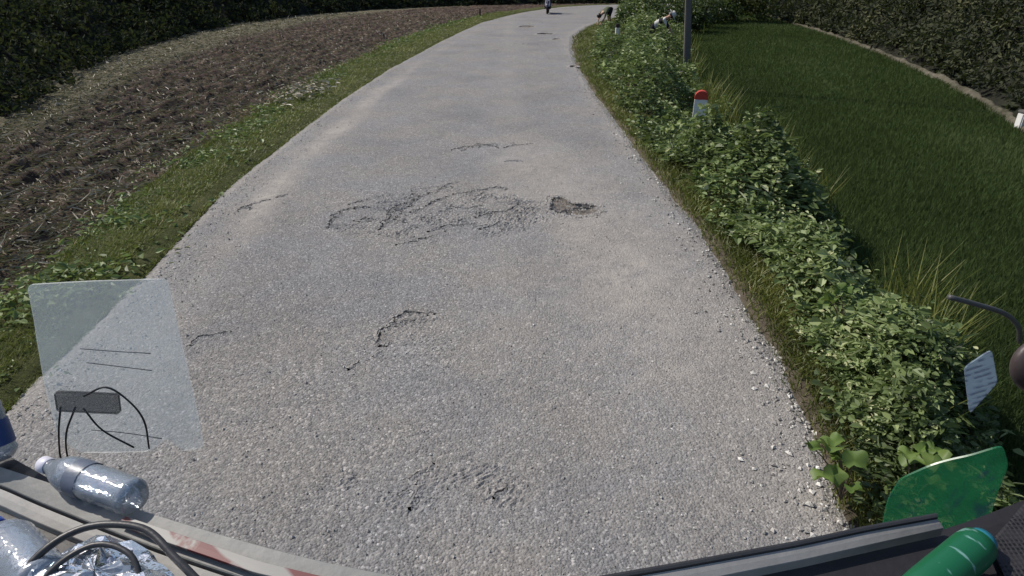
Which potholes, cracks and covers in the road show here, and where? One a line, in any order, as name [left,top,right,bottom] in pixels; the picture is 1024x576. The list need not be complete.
crack [398,463,435,508]
crack [326,182,534,245]
crack [239,194,288,210]
crack [489,483,510,499]
crack [452,142,532,162]
pothole [543,194,607,218]
crack [188,330,231,346]
crack [346,310,435,370]
